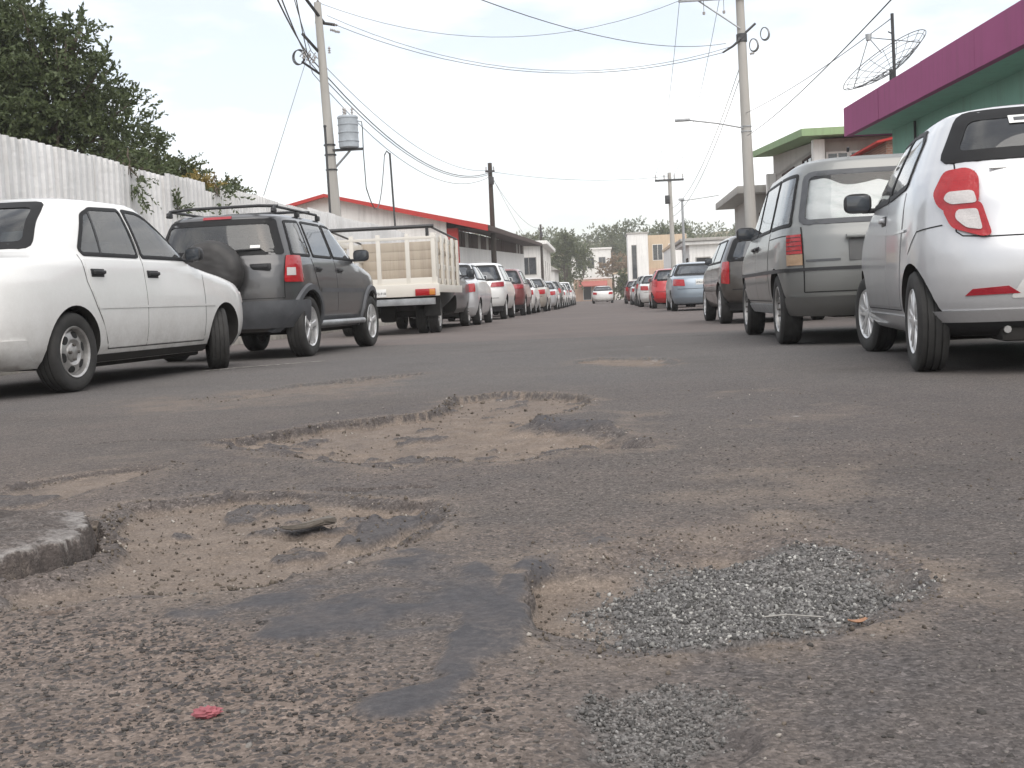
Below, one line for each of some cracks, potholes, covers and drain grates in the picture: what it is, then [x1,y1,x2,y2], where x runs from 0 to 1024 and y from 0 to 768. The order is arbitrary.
pothole [0,489,459,612]
pothole [0,464,174,511]
pothole [522,529,945,658]
pothole [211,390,657,469]
